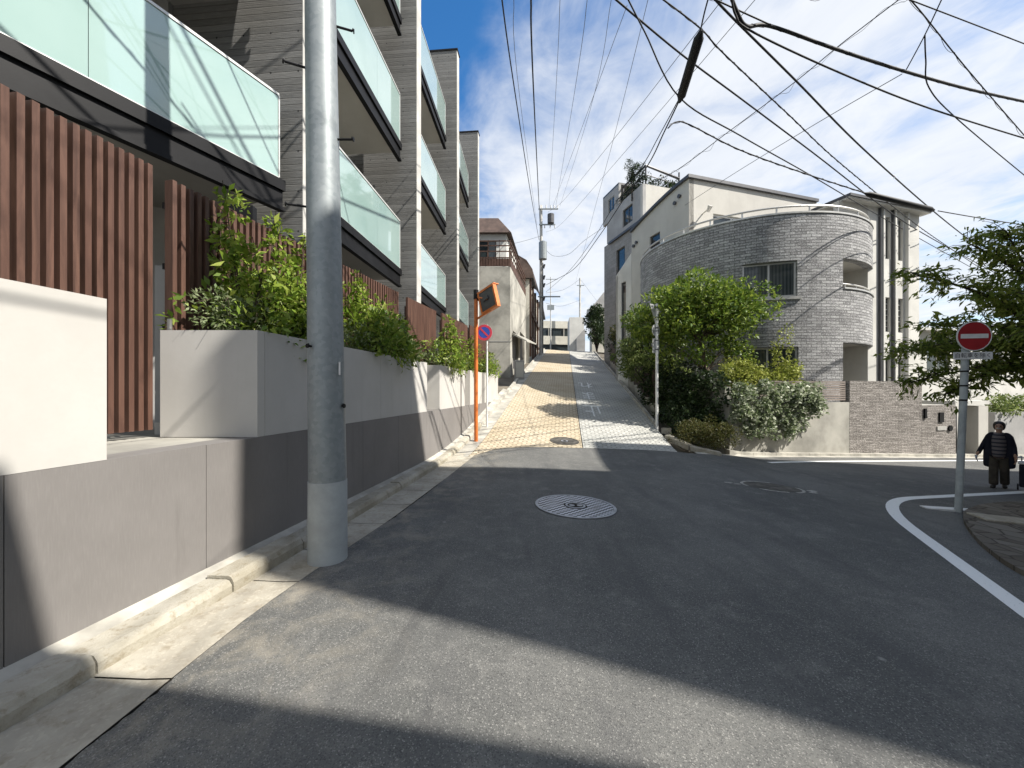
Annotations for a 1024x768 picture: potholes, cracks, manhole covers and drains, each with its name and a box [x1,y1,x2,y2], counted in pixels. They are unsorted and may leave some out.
manhole cover [550,437,579,445]
manhole cover [535,495,617,519]
manhole cover [726,481,817,493]
